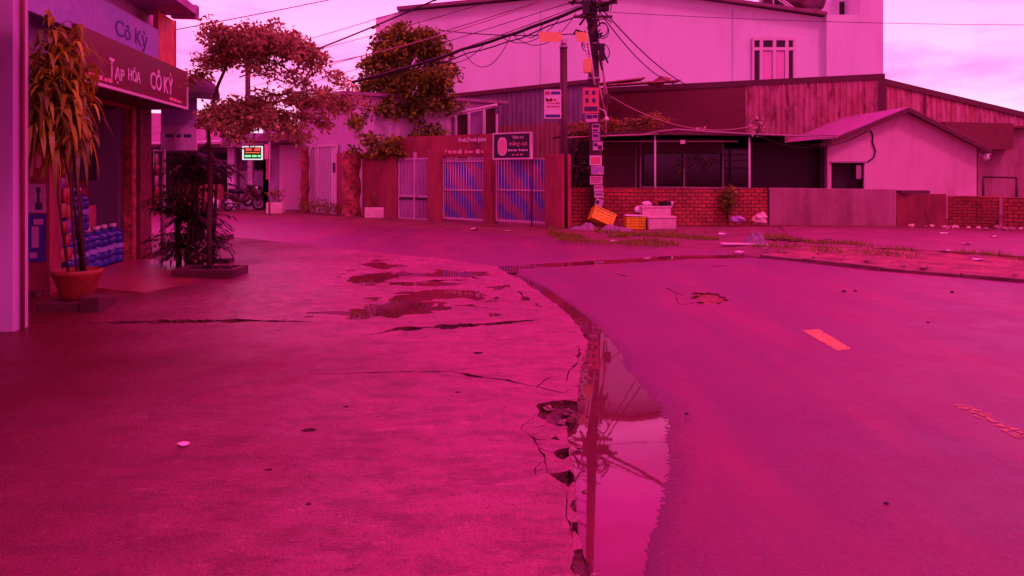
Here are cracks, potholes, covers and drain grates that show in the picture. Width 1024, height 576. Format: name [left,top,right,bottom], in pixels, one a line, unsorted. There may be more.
pothole [688,292,728,305]
crack [565,492,573,545]
crack [521,414,554,475]
crack [309,347,581,393]
